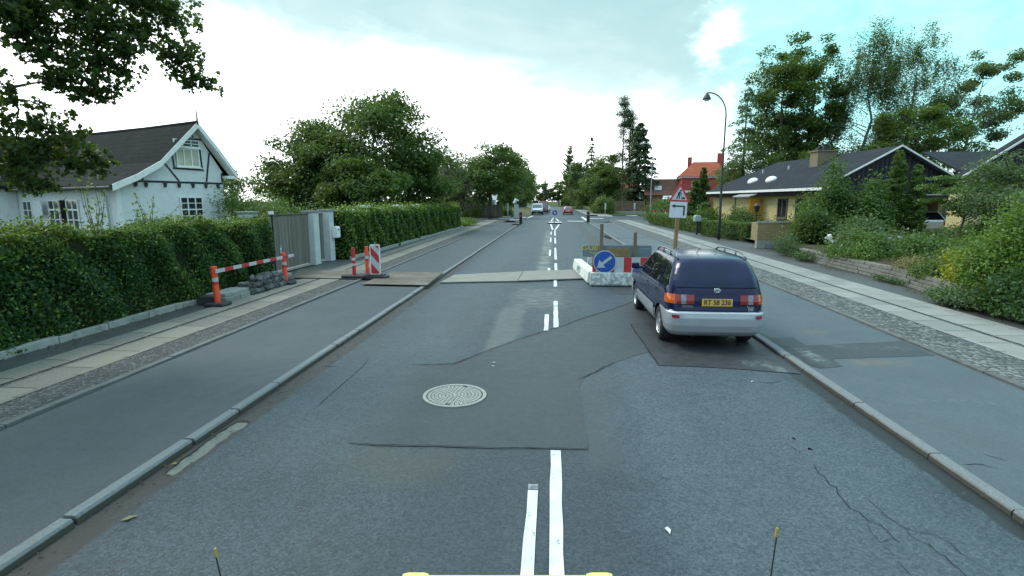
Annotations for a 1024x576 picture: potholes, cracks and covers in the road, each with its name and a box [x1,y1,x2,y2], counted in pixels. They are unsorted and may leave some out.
manhole cover [423,384,486,408]
crack [787,444,984,576]
